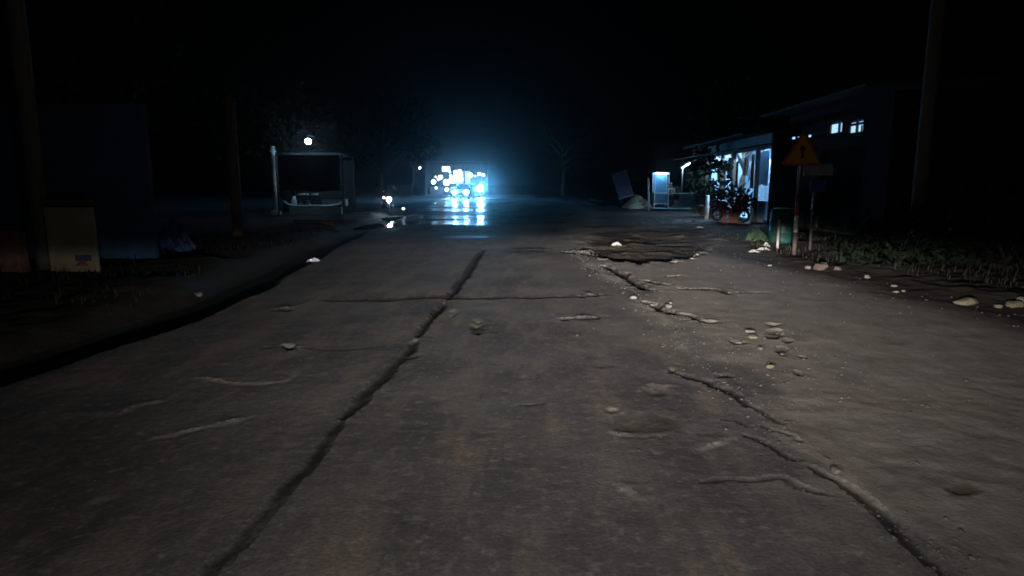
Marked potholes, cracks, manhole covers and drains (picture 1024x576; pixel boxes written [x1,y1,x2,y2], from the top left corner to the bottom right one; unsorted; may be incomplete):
crack [113,400,169,418]
crack [513,249,778,324]
crack [675,368,954,576]
pothole [574,226,729,266]
crack [261,339,421,421]
